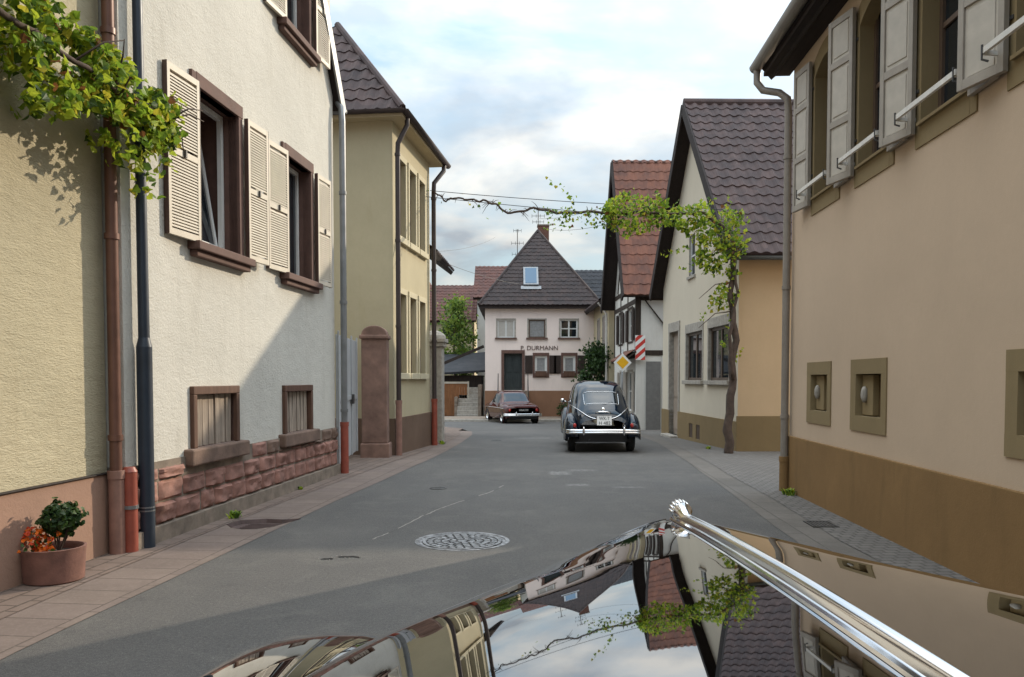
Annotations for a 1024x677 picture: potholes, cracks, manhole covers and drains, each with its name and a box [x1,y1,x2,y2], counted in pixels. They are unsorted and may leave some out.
manhole cover [415,532,509,551]
